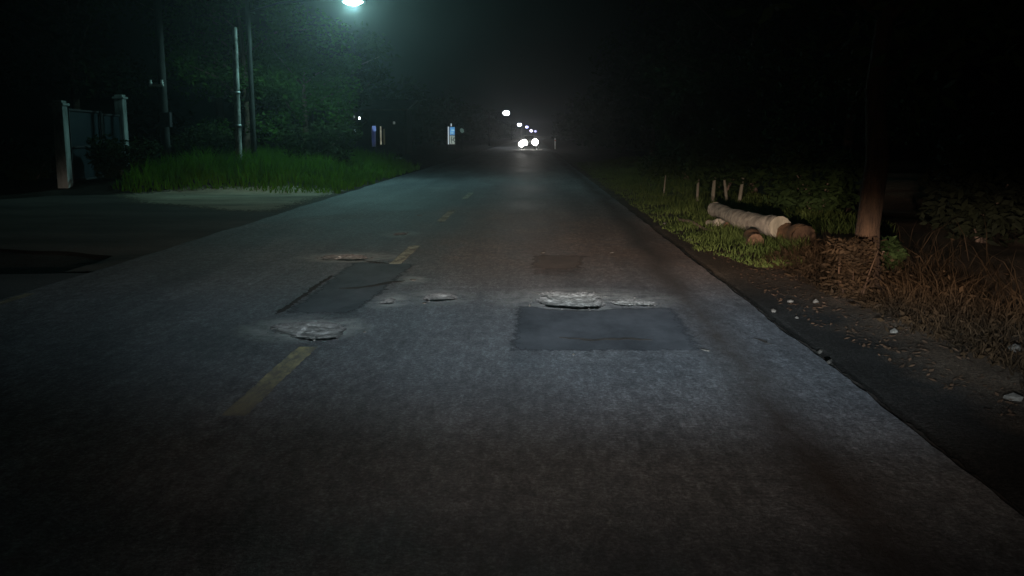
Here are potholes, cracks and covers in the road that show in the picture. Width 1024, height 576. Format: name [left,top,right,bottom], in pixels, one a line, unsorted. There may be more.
pothole [423,293,463,302]
pothole [530,290,615,310]
pothole [267,320,354,341]
pothole [610,297,666,307]
